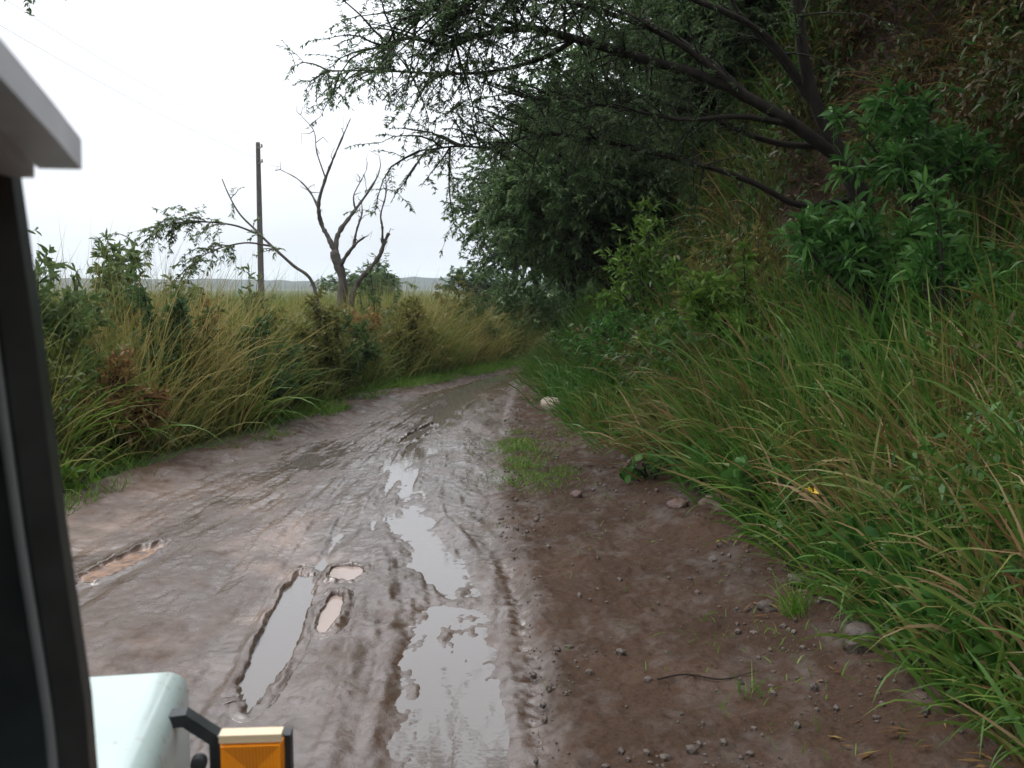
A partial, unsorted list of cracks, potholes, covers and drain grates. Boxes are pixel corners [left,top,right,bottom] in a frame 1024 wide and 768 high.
pothole [394,423,441,444]
pothole [302,587,356,639]
pothole [221,566,331,723]
pothole [74,538,180,589]
pothole [312,561,375,584]
